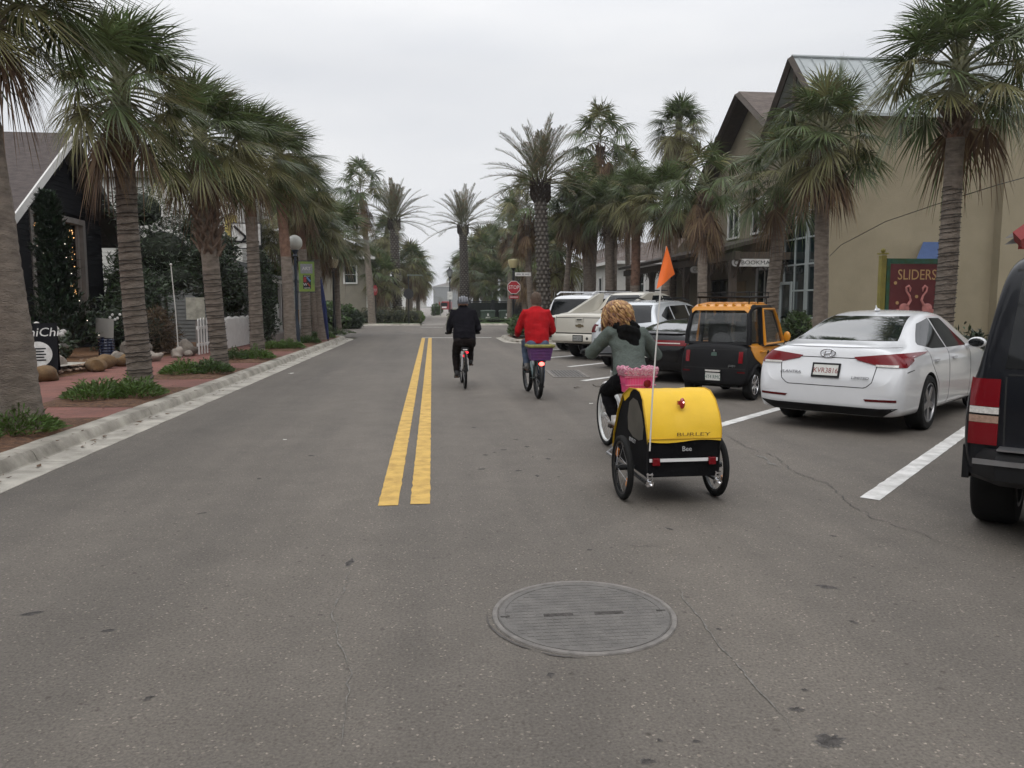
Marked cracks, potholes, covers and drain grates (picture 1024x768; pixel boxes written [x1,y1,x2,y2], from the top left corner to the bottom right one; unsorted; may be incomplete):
manhole cover [492,581,678,656]
drain grate [545,370,590,378]
crack [331,571,353,742]
crack [674,586,793,730]
